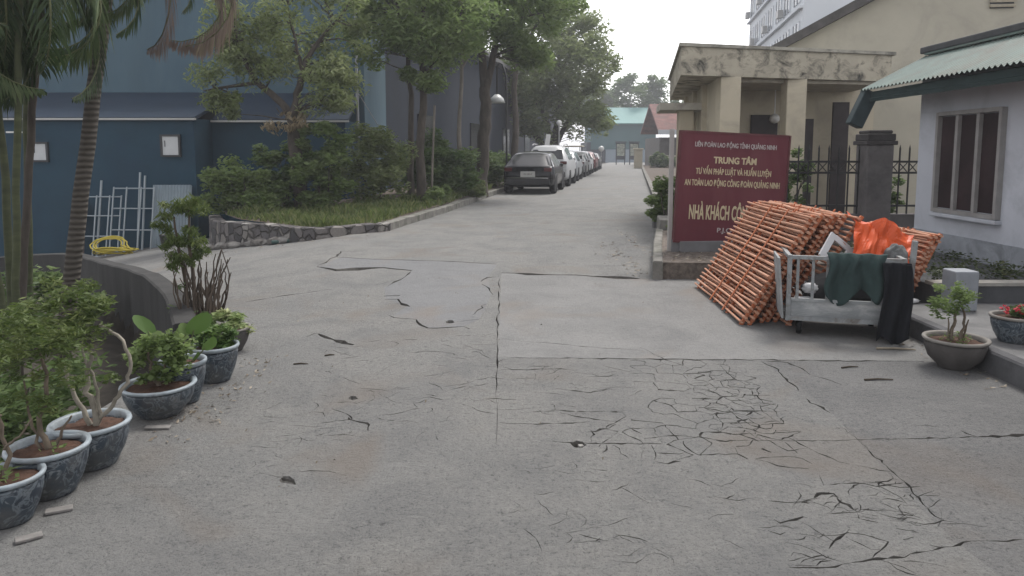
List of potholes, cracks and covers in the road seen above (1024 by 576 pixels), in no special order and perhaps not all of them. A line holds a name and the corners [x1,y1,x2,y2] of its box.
crack [250,251,1024,576]
